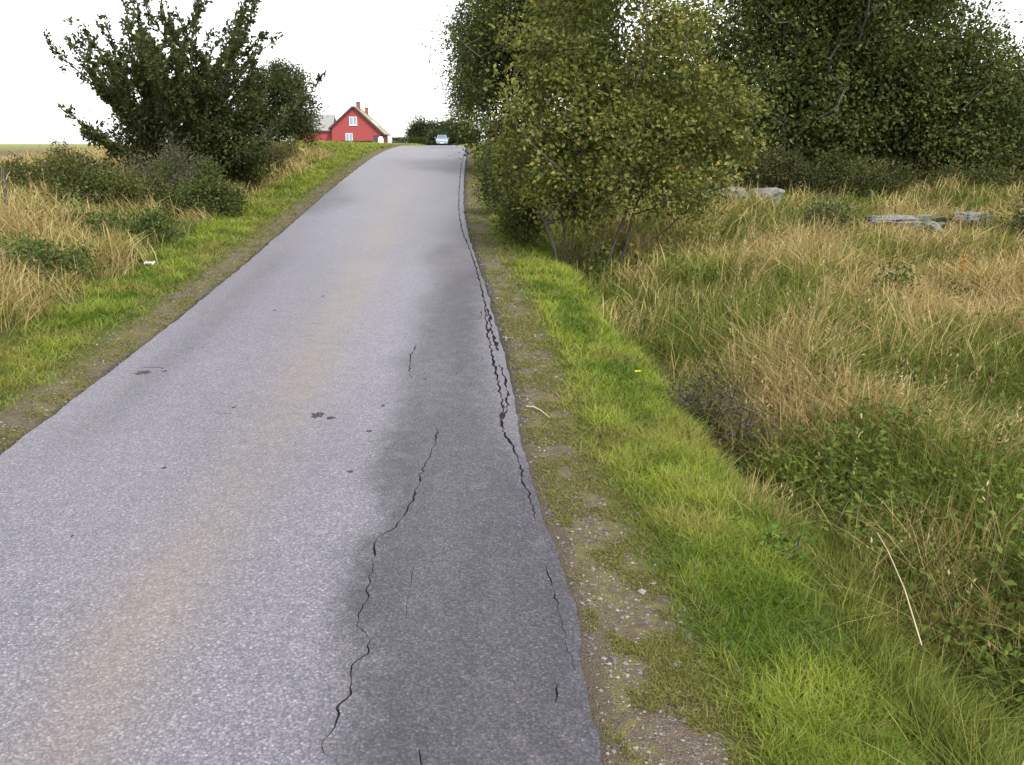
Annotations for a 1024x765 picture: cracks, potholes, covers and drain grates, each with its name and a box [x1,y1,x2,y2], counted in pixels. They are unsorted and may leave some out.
crack [540,563,575,702]
crack [458,153,536,520]
crack [321,428,438,757]
